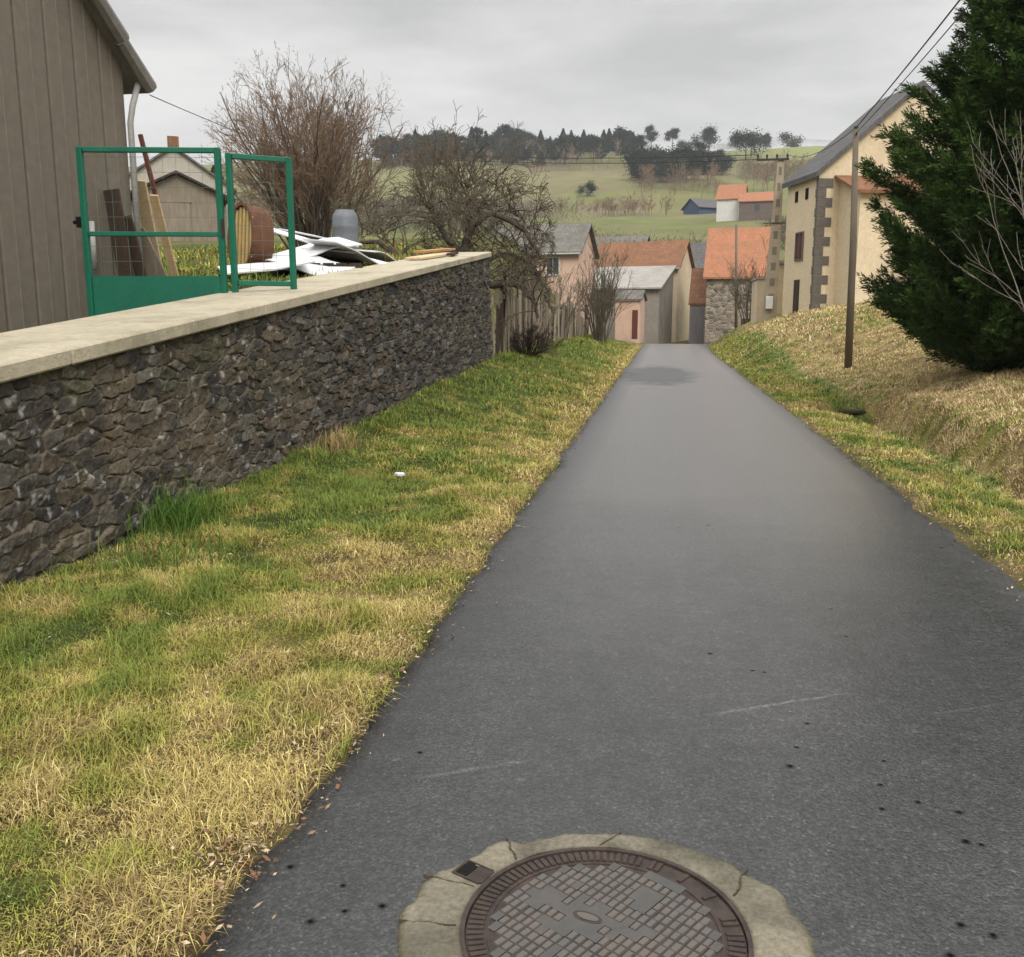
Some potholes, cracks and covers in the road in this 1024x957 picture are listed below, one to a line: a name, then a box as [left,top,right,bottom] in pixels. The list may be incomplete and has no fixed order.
manhole cover [397,834,816,957]
